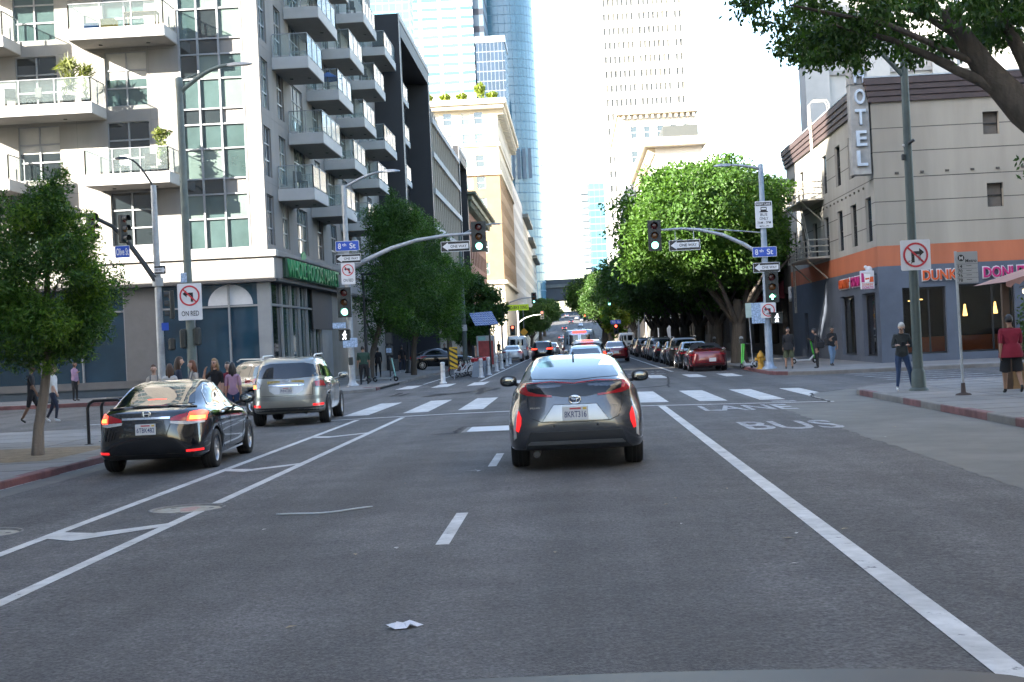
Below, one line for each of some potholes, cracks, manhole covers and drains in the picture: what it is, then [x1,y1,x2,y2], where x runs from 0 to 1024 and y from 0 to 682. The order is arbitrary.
manhole cover [148,503,226,514]
manhole cover [0,527,24,536]
